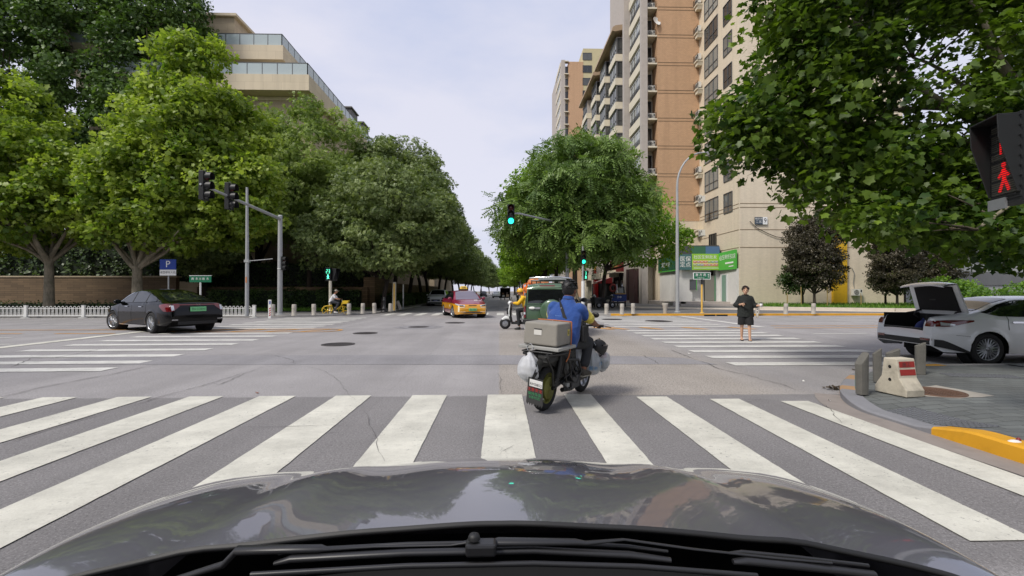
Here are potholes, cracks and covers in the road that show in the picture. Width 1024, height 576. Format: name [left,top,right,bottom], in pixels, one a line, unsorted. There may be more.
manhole cover [922,386,969,398]
crack [243,367,385,461]
